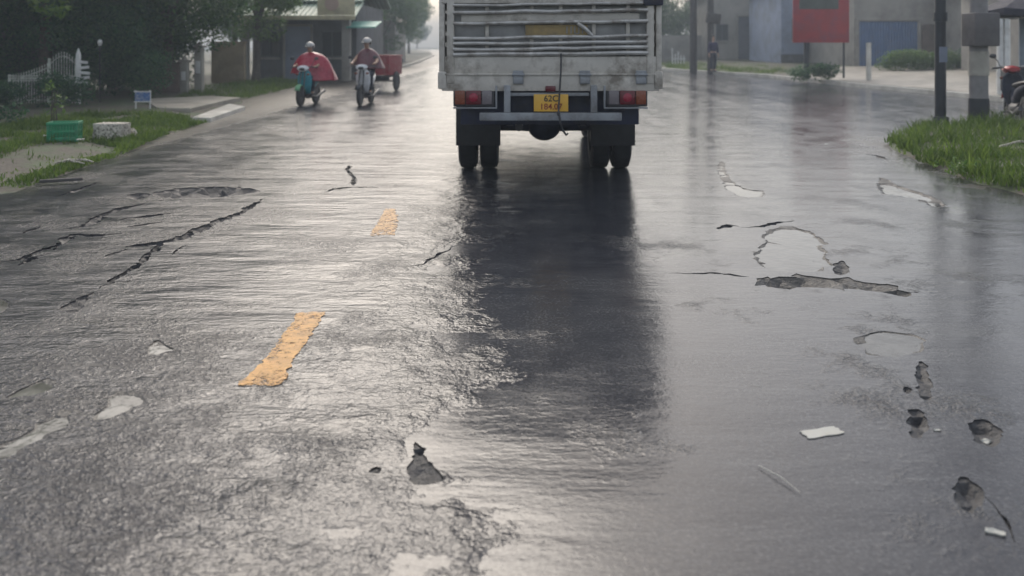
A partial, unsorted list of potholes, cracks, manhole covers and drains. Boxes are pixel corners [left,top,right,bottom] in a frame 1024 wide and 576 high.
pothole [968,419,1003,447]
crack [413,246,456,266]
pothole [152,186,260,199]
crack [1,182,264,289]
crack [716,221,792,229]
pothole [906,409,929,439]
pothole [951,477,984,513]
pothole [755,273,918,297]
pothole [914,361,933,400]
crack [326,165,379,192]
pothole [407,442,445,485]
